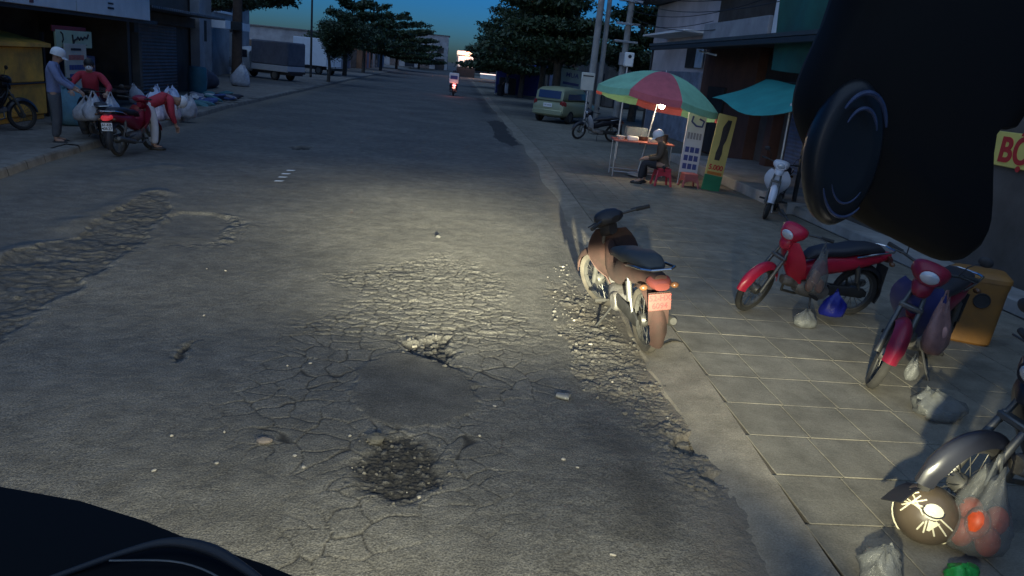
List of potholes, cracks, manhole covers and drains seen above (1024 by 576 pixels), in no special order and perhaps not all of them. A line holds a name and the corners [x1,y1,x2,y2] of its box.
pothole [398,336,456,369]
pothole [343,430,456,507]
crack [173,249,584,576]
